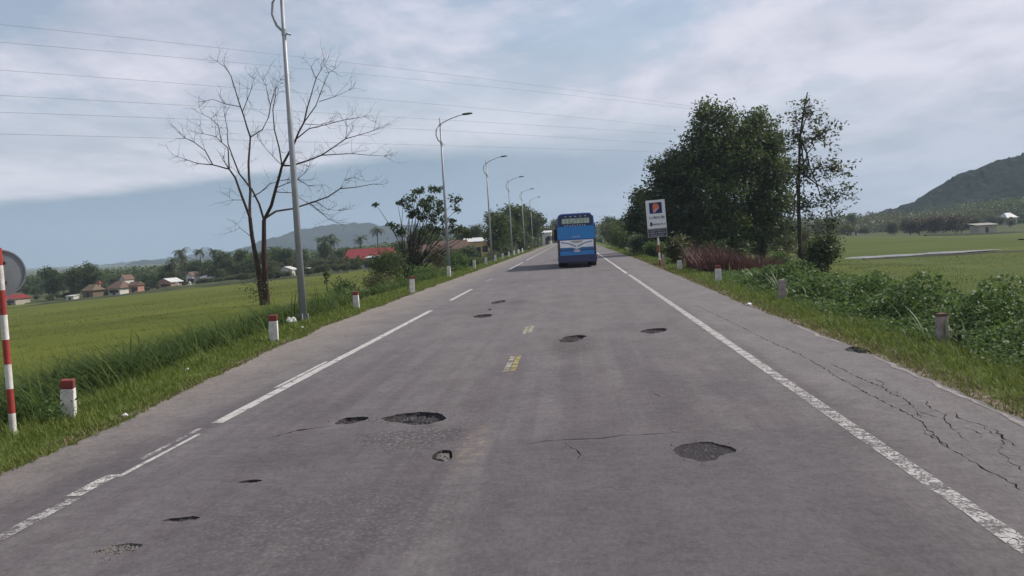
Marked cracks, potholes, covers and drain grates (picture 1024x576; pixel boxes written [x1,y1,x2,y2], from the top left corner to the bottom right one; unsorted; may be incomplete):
crack [701,308,1024,491]
pothole [93,543,143,561]
pothole [329,416,370,427]
pothole [668,439,747,466]
pothole [558,334,588,344]
pothole [148,516,200,525]
crack [524,427,676,459]
pothole [368,410,458,429]
pothole [432,450,453,462]
